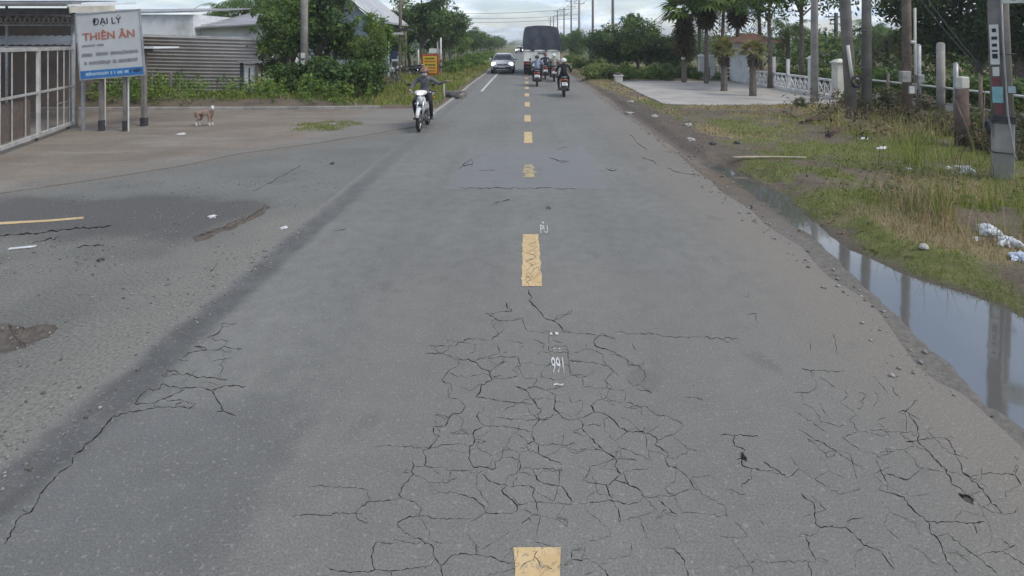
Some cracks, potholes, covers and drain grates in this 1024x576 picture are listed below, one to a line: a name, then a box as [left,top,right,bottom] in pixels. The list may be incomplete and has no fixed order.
crack [112,323,246,417]
crack [1,225,110,248]
crack [750,335,1024,576]
crack [722,434,785,494]
crack [300,292,749,576]
crack [5,417,112,544]
